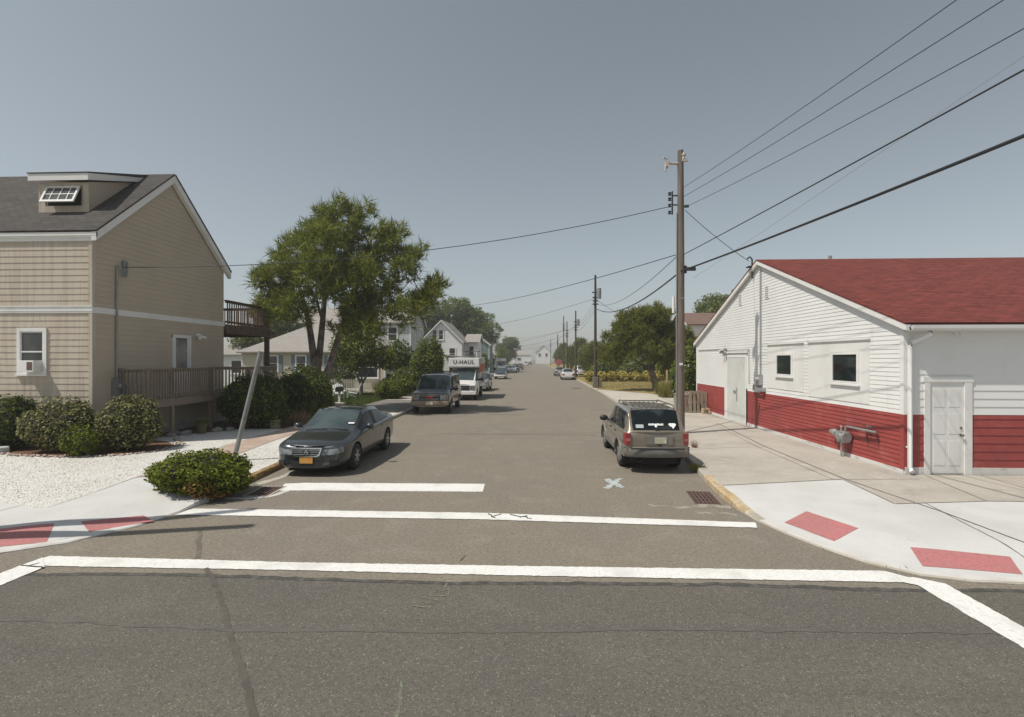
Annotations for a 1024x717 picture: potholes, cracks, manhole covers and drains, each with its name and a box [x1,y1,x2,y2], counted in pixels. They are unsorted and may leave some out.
drain grate [242,486,287,497]
drain grate [686,491,721,505]
